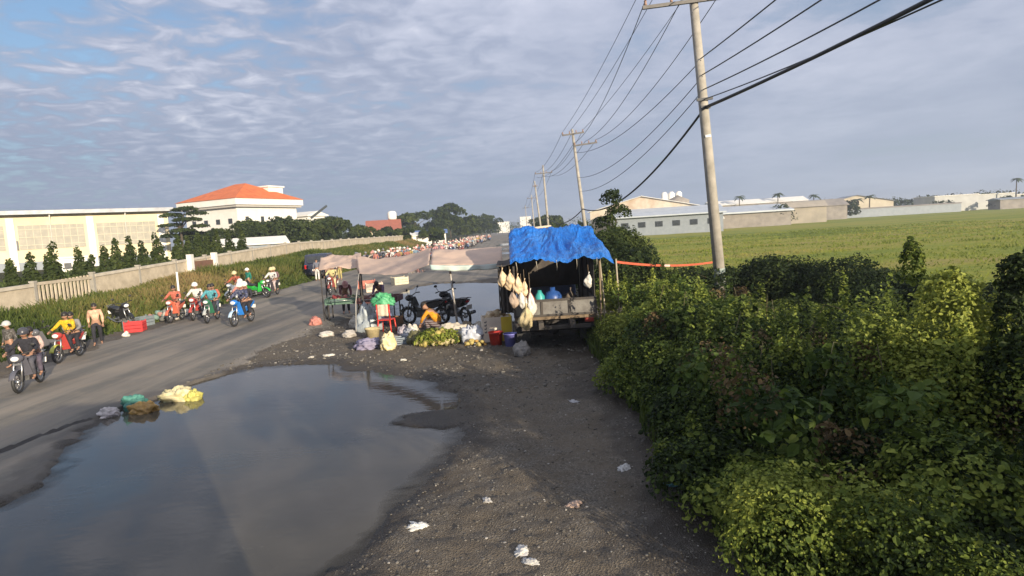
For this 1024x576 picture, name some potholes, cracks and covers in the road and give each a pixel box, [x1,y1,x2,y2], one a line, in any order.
pothole [0,361,468,576]
